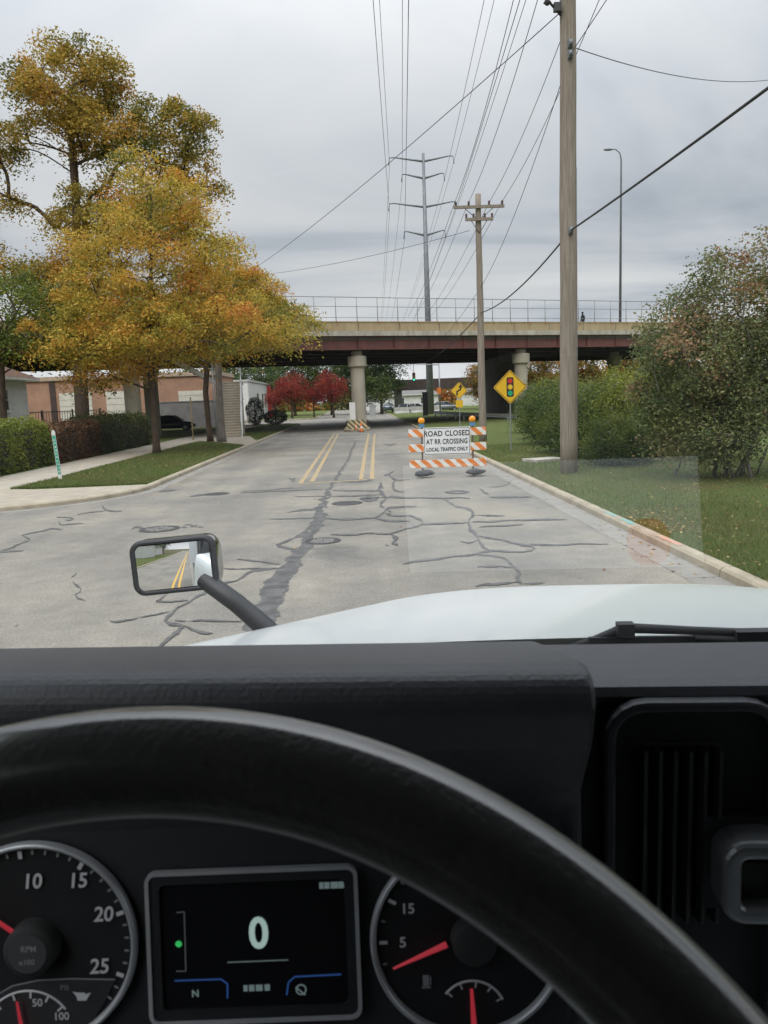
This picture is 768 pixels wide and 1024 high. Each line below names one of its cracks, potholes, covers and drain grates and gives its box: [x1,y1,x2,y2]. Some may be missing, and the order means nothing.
crack [0,506,121,553]
crack [240,471,597,586]
manhole cover [139,525,180,533]
